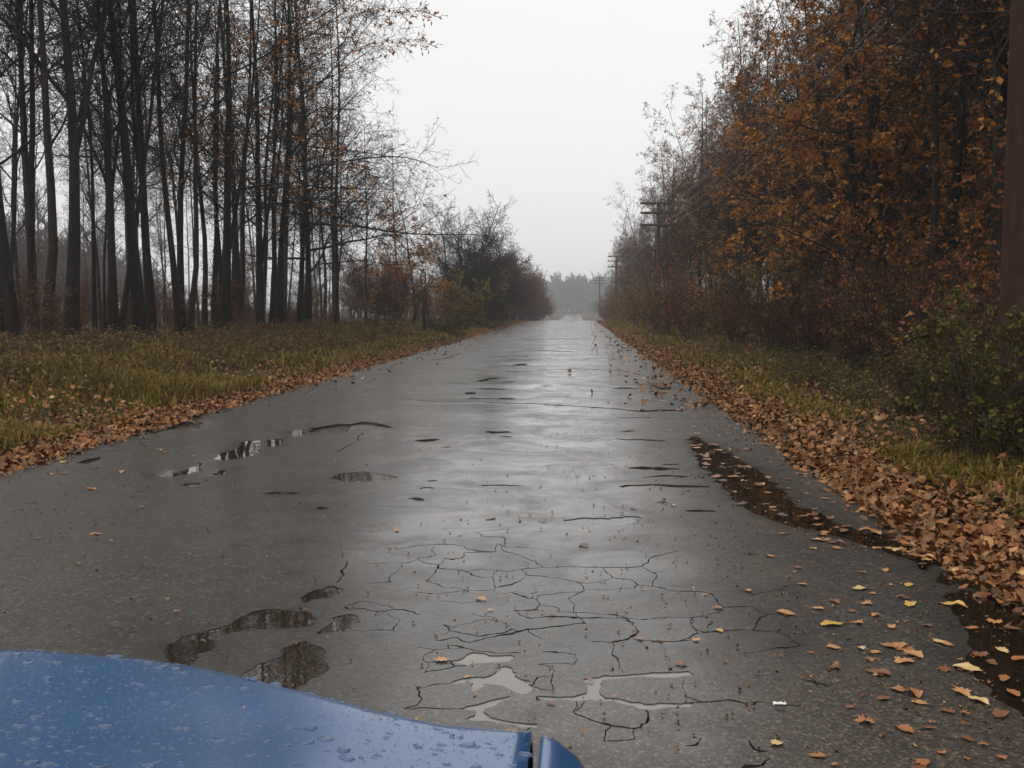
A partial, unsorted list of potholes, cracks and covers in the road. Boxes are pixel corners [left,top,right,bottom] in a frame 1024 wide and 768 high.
crack [345,527,801,746]
crack [619,464,710,488]
pothole [163,609,318,658]
crack [406,398,684,441]
